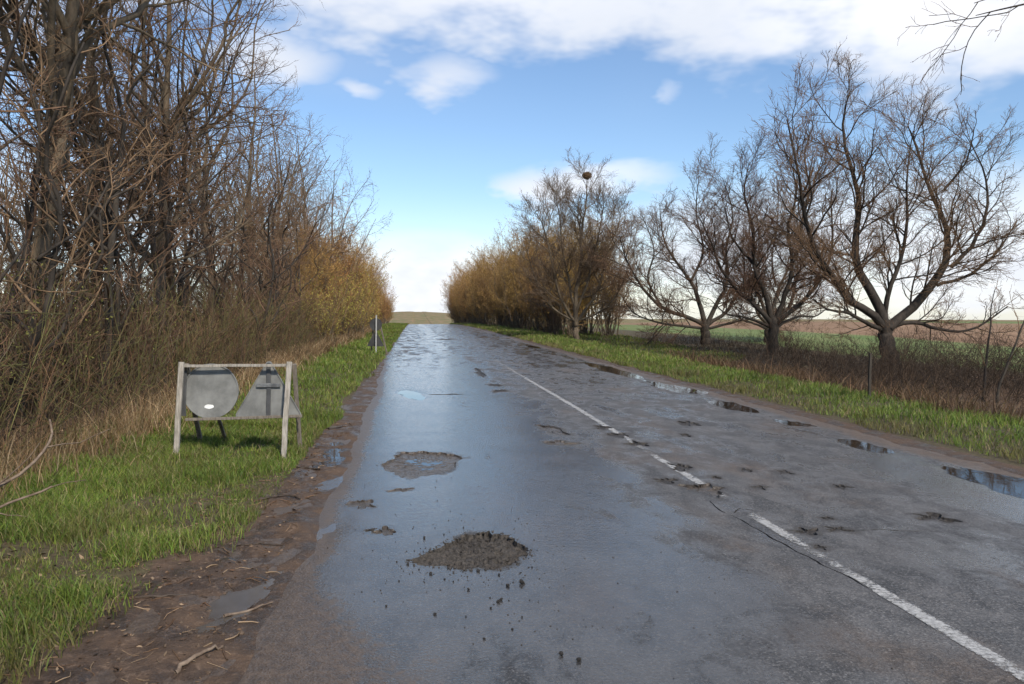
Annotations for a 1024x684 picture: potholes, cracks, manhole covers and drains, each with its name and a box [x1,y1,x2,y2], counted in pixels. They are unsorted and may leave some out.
pothole [912,512,963,523]
pothole [790,527,818,535]
pothole [381,451,462,479]
crack [710,501,867,588]
pothole [668,463,693,472]
pothole [534,424,570,435]
pothole [372,526,396,536]
pothole [344,499,375,509]
